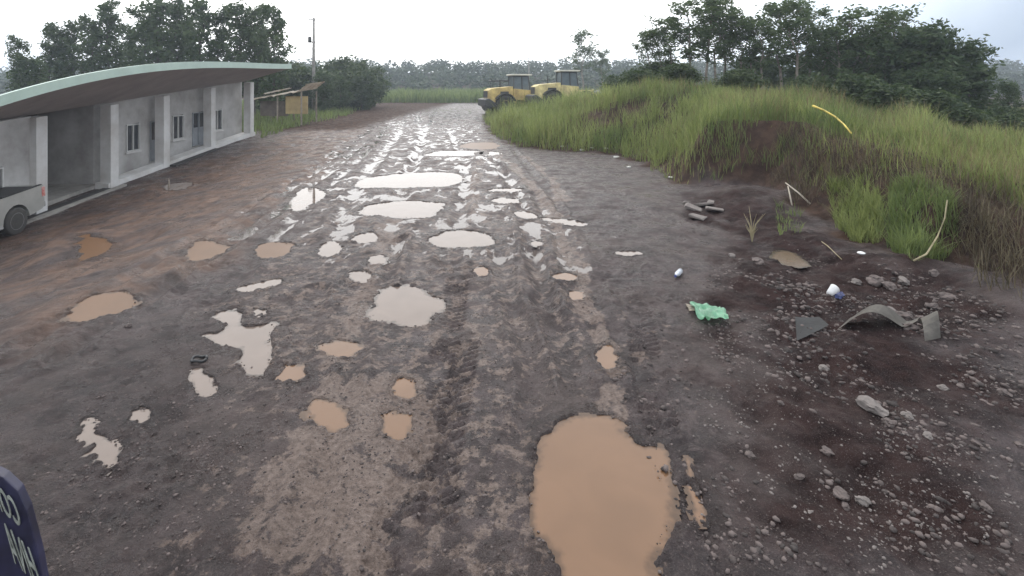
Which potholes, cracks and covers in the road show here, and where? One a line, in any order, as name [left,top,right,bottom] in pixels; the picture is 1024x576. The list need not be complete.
pothole [182,363,226,402]
pothole [248,241,300,260]
pothole [268,360,314,384]
pothole [175,239,236,263]
pothole [186,304,288,381]
pothole [348,199,451,220]
pothole [298,395,359,437]
pothole [352,171,467,191]
pothole [313,337,369,359]
pothole [50,288,145,327]
pothole [421,227,505,251]
pothole [389,375,423,402]
